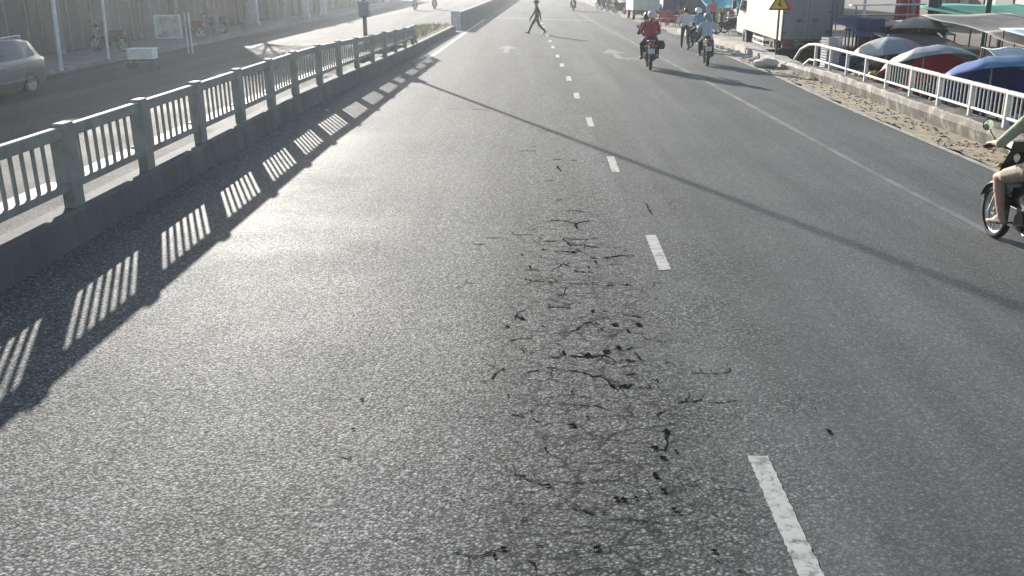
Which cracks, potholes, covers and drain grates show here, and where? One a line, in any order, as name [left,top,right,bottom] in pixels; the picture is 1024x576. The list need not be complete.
crack [437,538,548,573]
crack [481,199,748,570]
